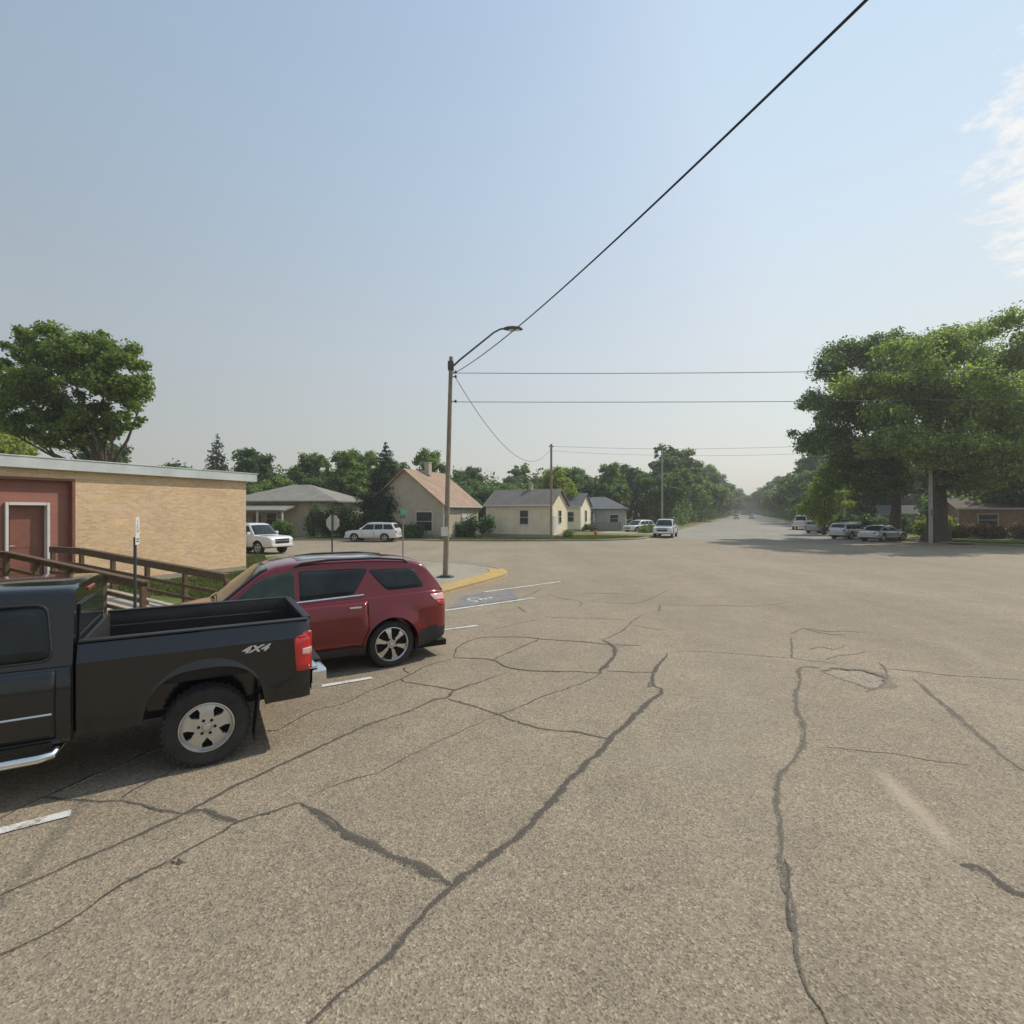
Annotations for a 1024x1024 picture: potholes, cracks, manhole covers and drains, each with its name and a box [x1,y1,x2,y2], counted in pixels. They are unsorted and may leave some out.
crack [790,628,1024,692]
crack [0,588,668,956]
crack [830,747,964,765]
